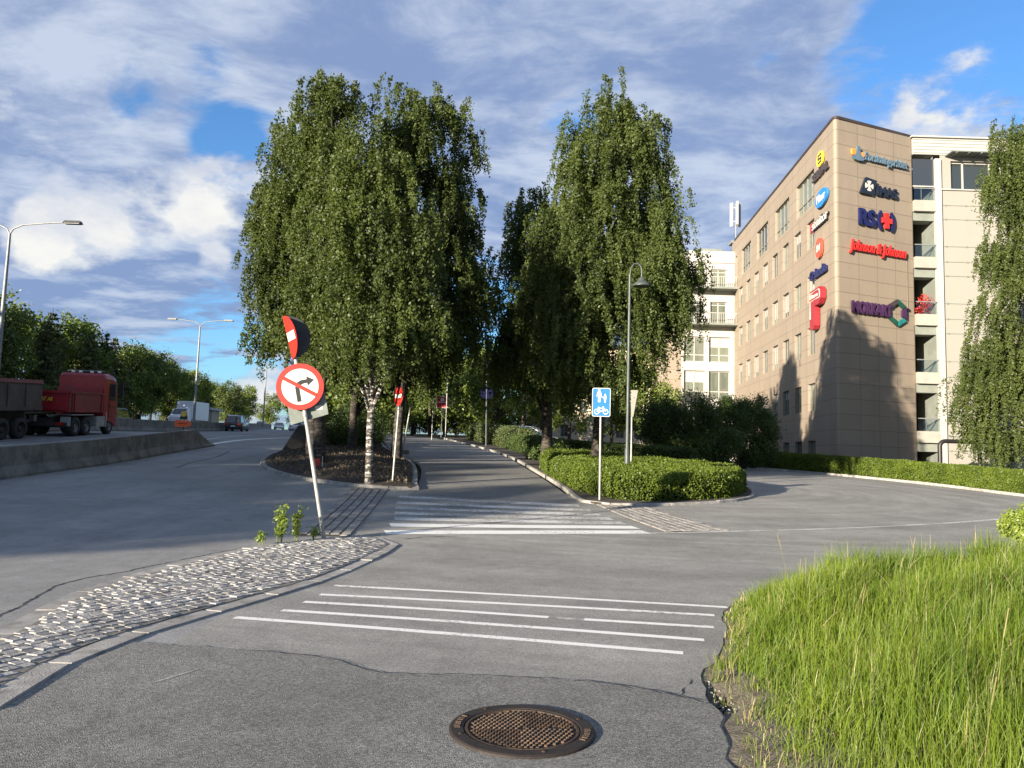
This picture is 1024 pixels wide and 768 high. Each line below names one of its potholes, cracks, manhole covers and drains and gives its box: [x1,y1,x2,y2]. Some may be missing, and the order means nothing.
manhole cover [449,704,595,759]
crack [571,678,712,703]
